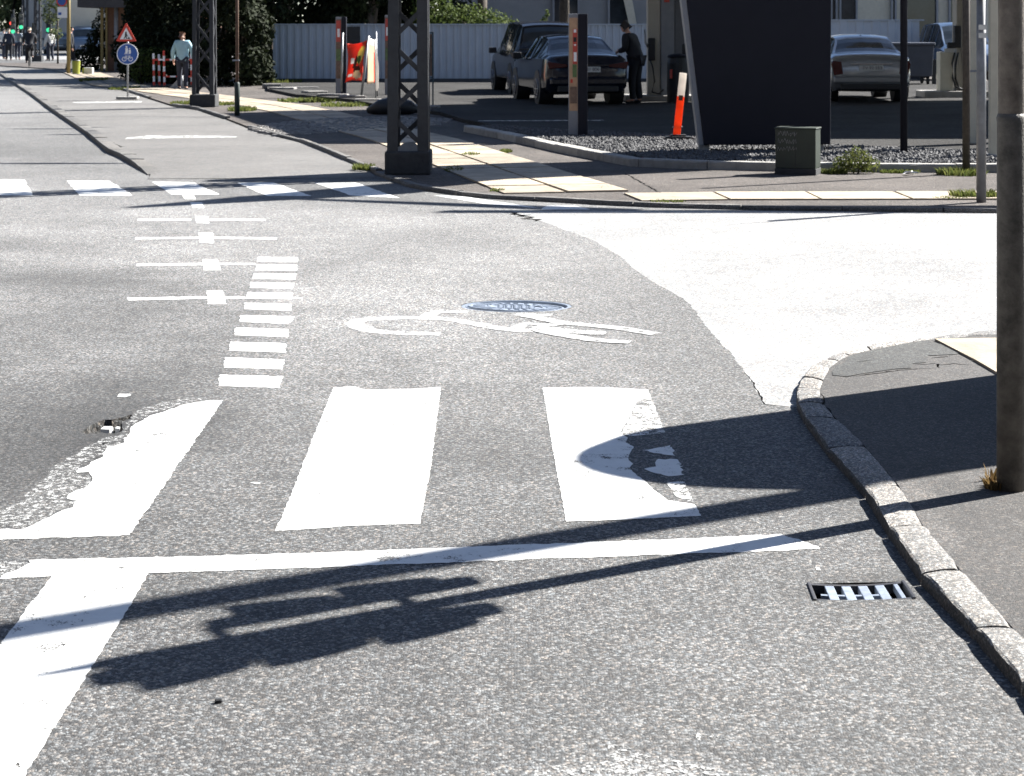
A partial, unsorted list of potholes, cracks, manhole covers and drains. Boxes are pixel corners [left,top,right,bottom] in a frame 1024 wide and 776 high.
manhole cover [461,300,571,312]
drain grate [807,580,916,601]
crack [849,356,965,377]
pothole [81,415,133,434]
